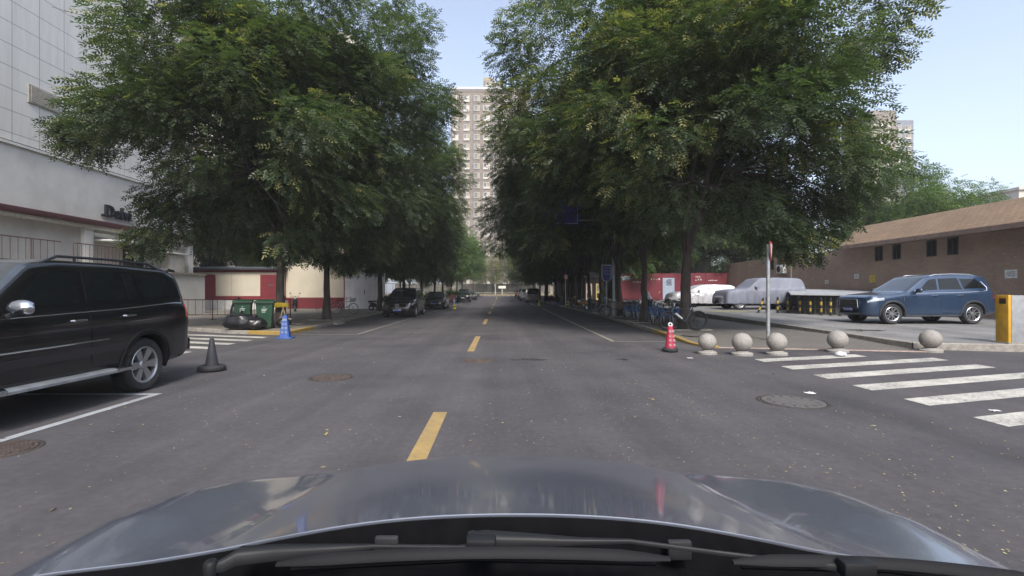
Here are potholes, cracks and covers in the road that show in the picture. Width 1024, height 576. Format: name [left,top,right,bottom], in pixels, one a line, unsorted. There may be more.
manhole cover [755,394,833,410]
manhole cover [308,374,354,382]
manhole cover [0,439,46,459]
